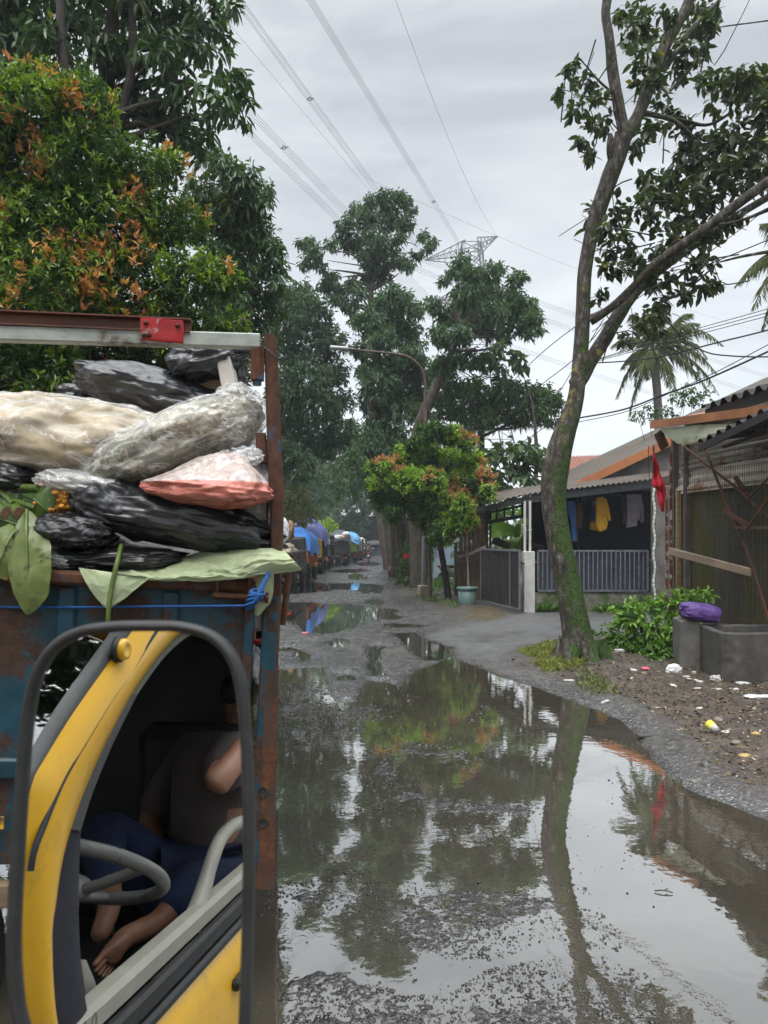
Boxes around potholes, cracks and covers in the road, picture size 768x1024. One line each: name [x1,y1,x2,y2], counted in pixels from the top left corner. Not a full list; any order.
pothole [361,643,393,676]
pothole [282,582,385,594]
pothole [292,648,315,662]
pothole [0,655,768,1024]
pothole [281,601,408,634]
pothole [361,598,388,606]
pothole [387,631,458,662]
